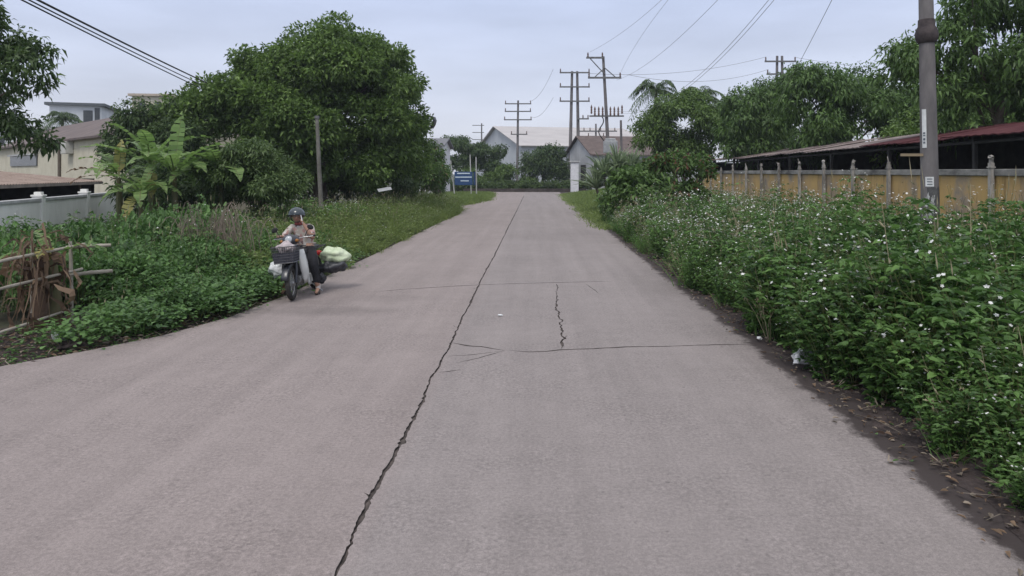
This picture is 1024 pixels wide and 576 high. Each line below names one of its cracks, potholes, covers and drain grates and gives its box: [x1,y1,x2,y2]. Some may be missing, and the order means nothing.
crack [334,196,738,576]
